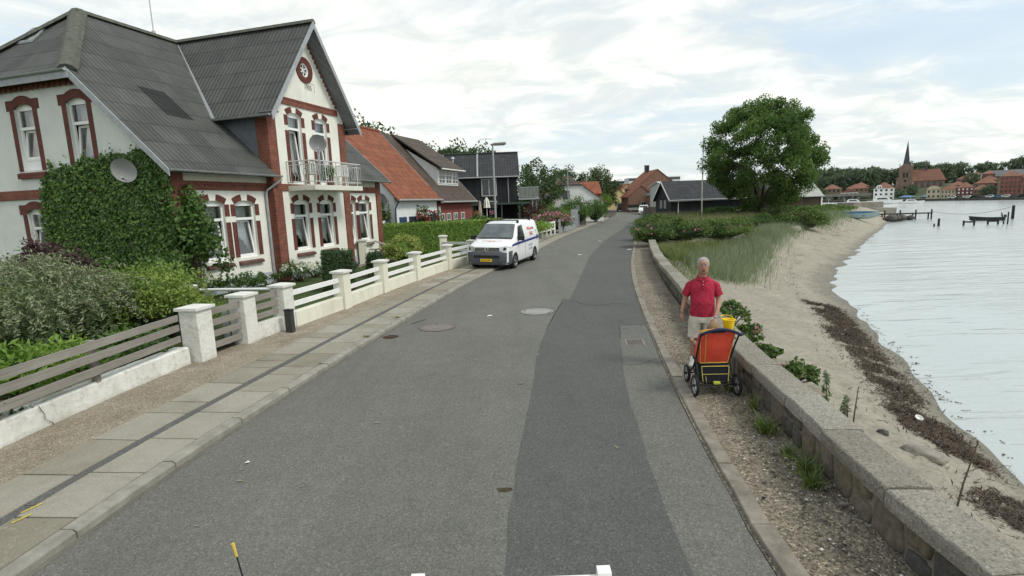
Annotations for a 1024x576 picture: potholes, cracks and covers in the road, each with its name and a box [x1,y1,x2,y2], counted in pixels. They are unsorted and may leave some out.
manhole cover [419,323,455,332]
